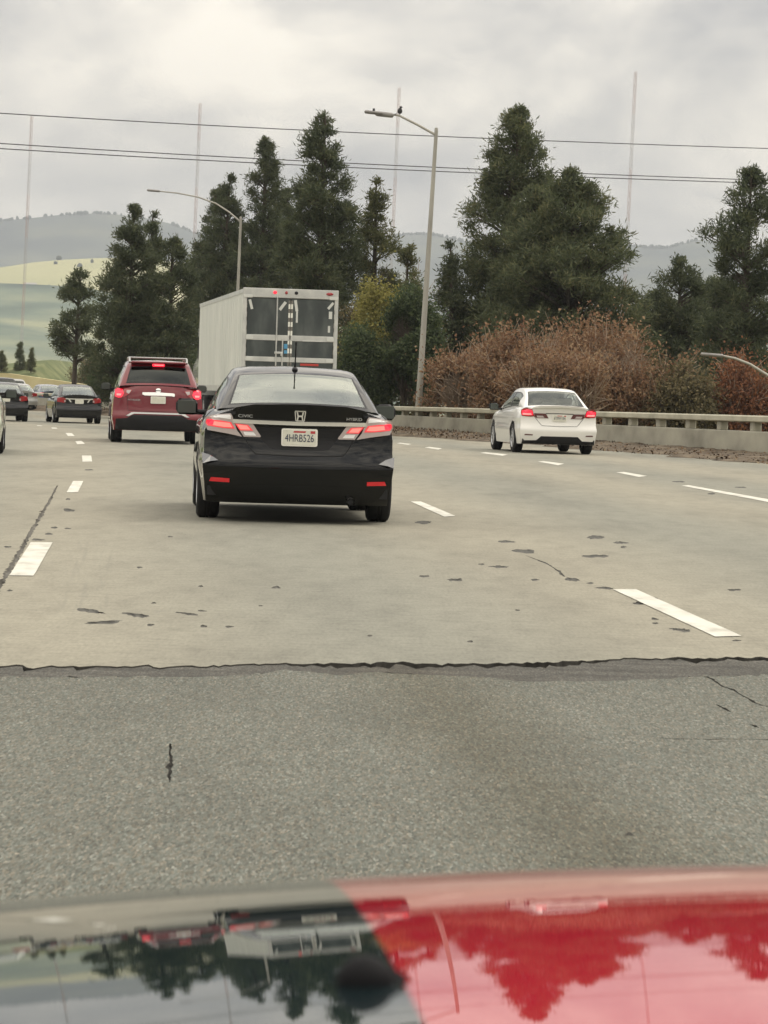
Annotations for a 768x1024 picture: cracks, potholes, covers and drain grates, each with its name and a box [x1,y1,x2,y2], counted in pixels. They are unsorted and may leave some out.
crack [0,657,768,712]
crack [165,743,173,782]
